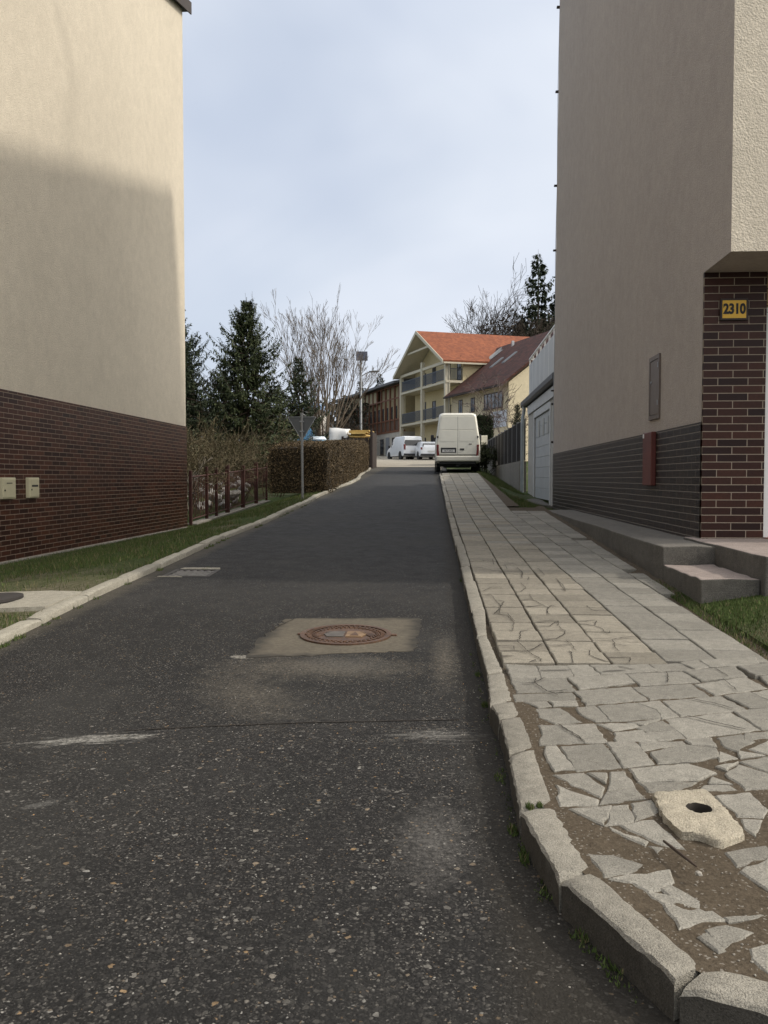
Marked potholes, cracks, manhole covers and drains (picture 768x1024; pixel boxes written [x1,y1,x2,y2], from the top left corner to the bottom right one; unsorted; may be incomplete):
drain grate [157,567,221,577]
manhole cover [297,624,397,646]
